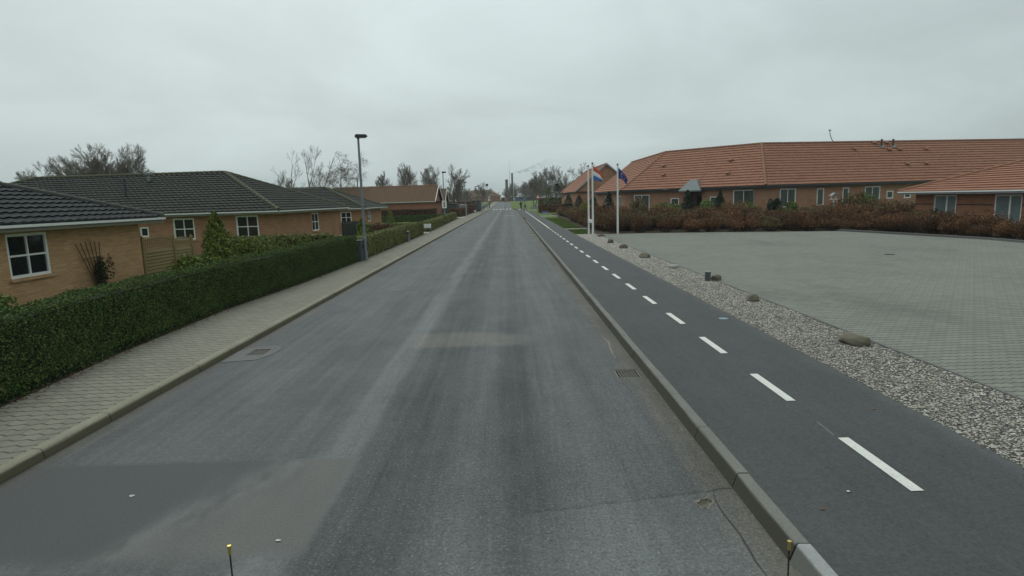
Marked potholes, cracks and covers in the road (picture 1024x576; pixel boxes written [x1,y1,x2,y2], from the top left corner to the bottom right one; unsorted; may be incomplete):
drain grate [614,369,642,378]
crack [713,488,767,576]
pothole [693,495,715,510]
